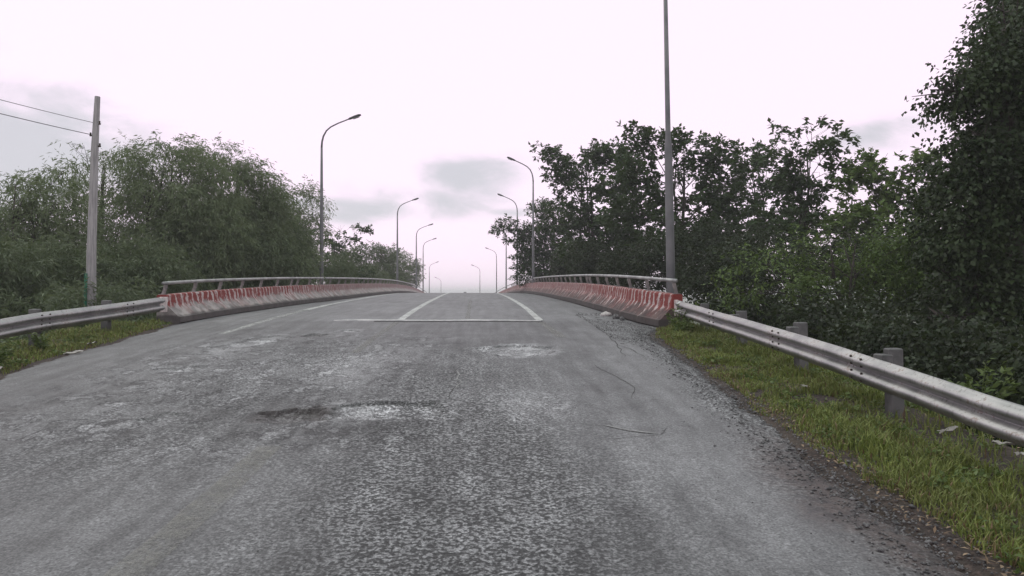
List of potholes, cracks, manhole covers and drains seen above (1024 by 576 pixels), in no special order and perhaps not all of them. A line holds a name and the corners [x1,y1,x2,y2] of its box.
pothole [320,400,452,421]
crack [605,425,668,439]
pothole [256,406,330,423]
crack [581,315,643,397]
